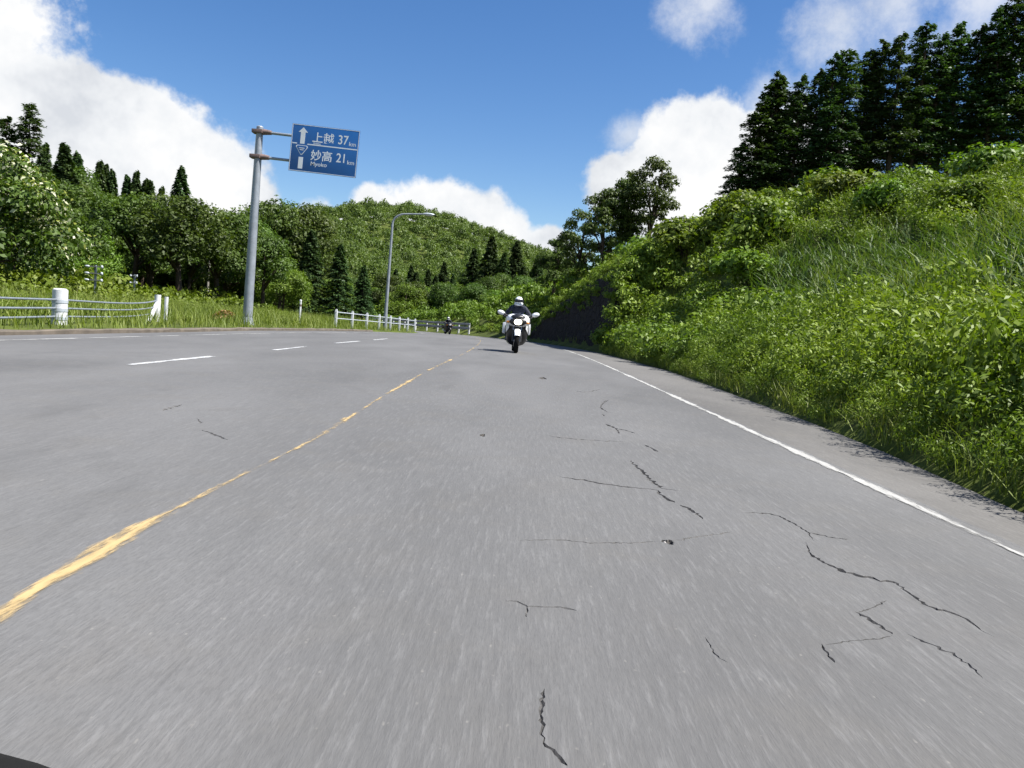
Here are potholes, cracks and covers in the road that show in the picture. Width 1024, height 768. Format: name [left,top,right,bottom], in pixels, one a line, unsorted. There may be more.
crack [751,512,988,677]
crack [510,600,577,617]
crack [529,389,728,544]
crack [538,690,567,766]
crack [163,404,228,440]
